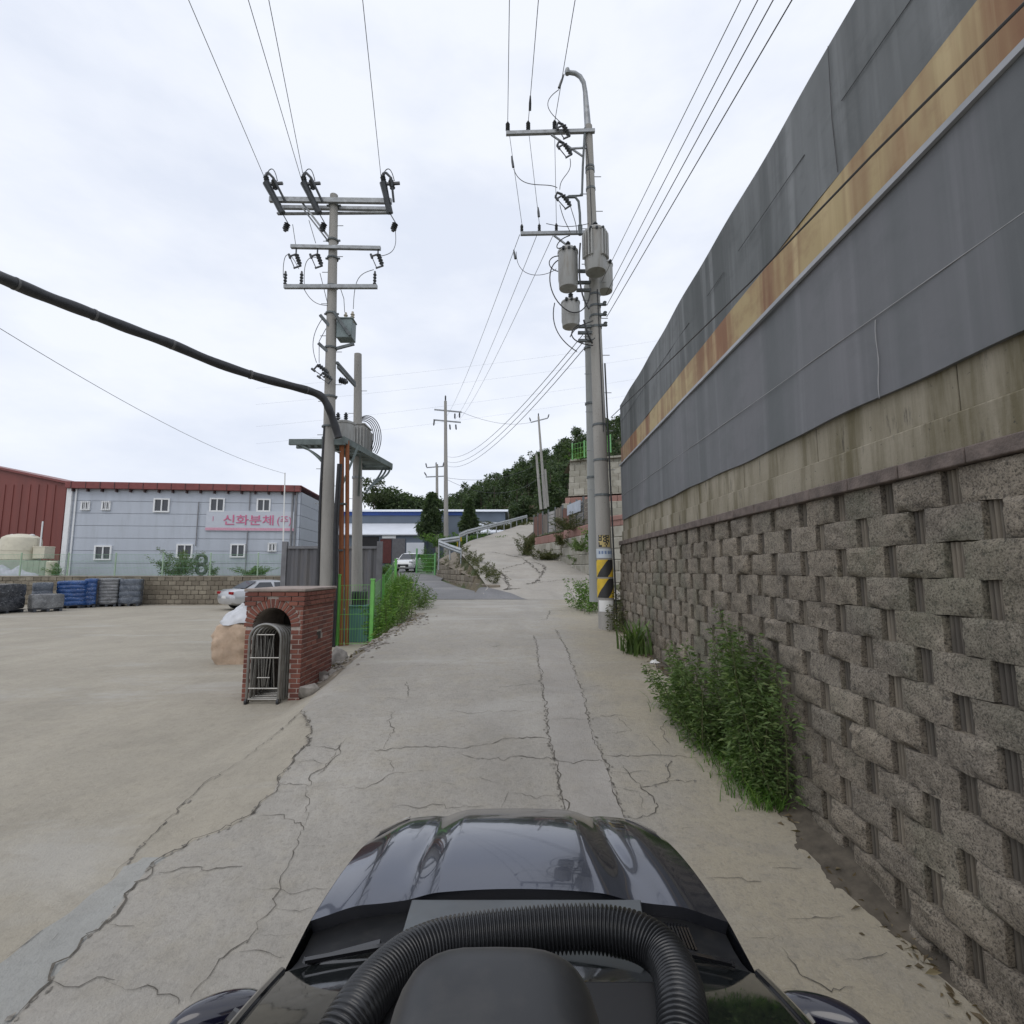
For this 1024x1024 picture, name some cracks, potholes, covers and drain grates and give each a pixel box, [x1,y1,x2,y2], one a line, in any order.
crack [463,552,569,590]
crack [596,714,697,819]
crack [348,657,583,788]
crack [4,707,342,1021]
